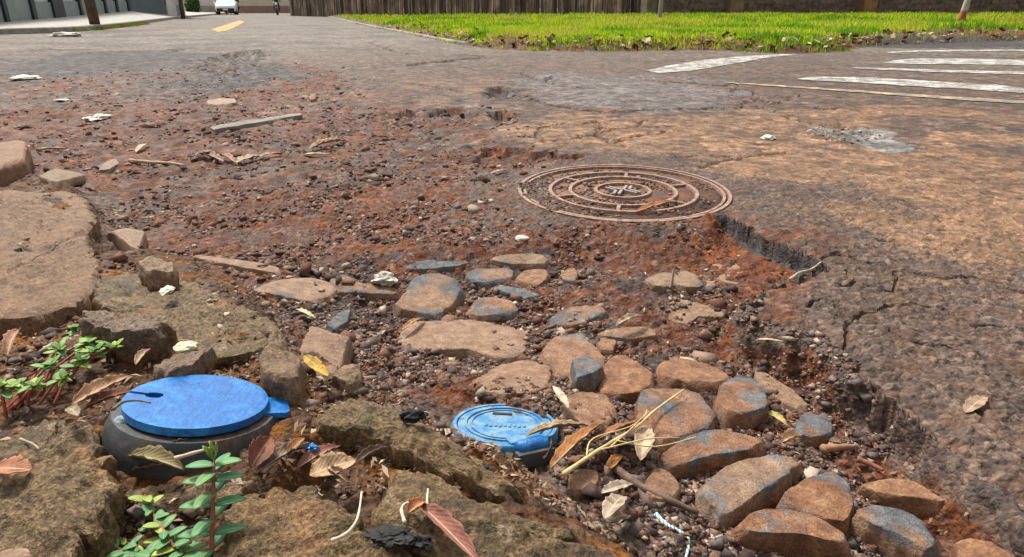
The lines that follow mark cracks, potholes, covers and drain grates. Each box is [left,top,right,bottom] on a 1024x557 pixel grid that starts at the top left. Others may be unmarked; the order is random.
pothole [367,106,481,126]
manhole cover [518,164,732,224]
crack [520,119,680,148]
pothole [485,109,527,126]
pothole [468,146,590,172]
utility cover [451,404,558,468]
utility cover [101,375,290,480]
pothole [805,122,886,145]
crack [799,237,1024,351]
pothole [288,212,1024,557]
pothole [476,86,533,103]
